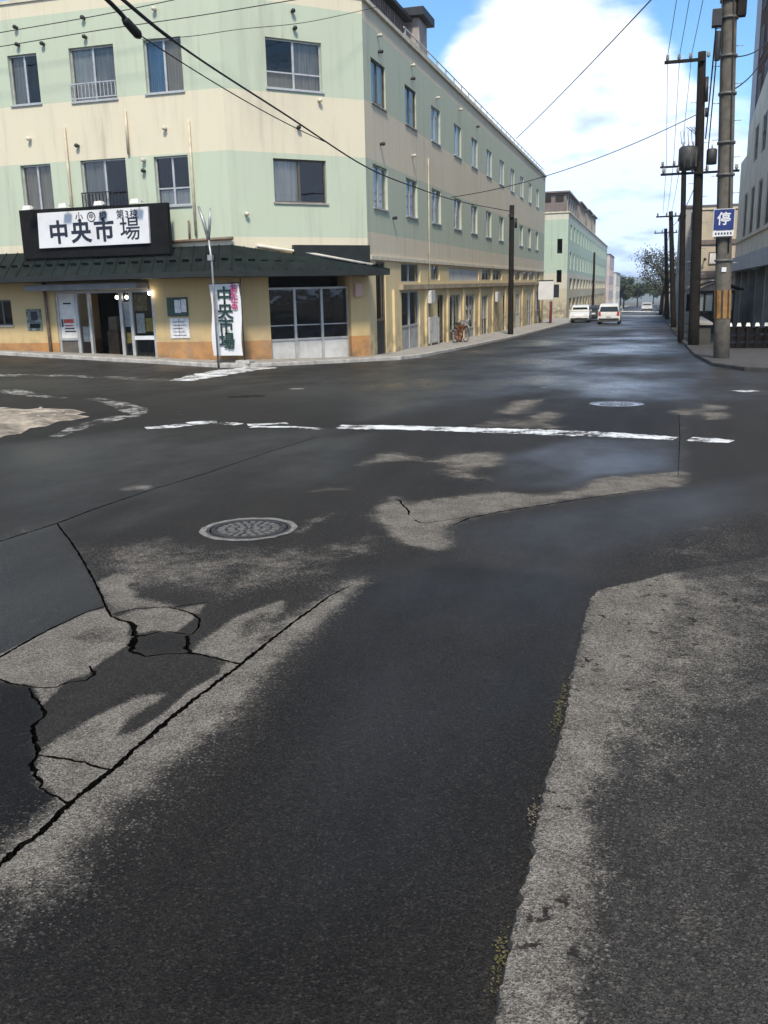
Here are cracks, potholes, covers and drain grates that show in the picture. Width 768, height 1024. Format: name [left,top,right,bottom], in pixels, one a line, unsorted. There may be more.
crack [0,584,353,867]
crack [396,499,480,523]
manhole cover [199,517,298,541]
